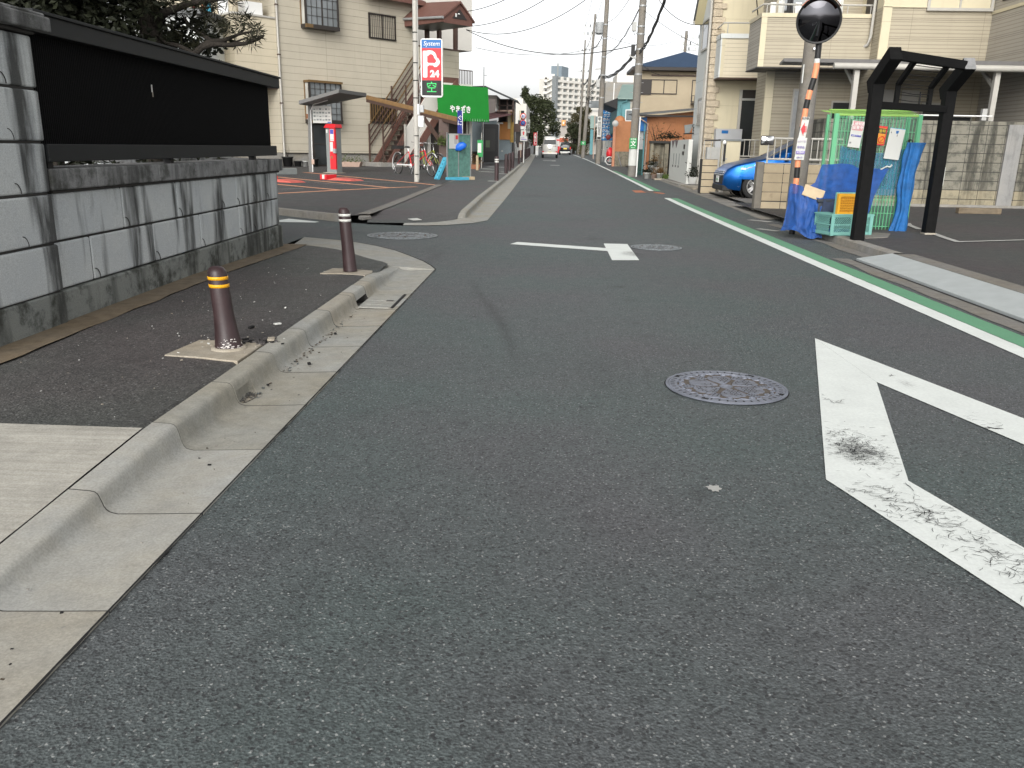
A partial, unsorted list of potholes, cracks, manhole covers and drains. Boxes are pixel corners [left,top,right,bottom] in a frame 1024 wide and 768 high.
manhole cover [366,232,438,240]
manhole cover [664,370,789,405]
